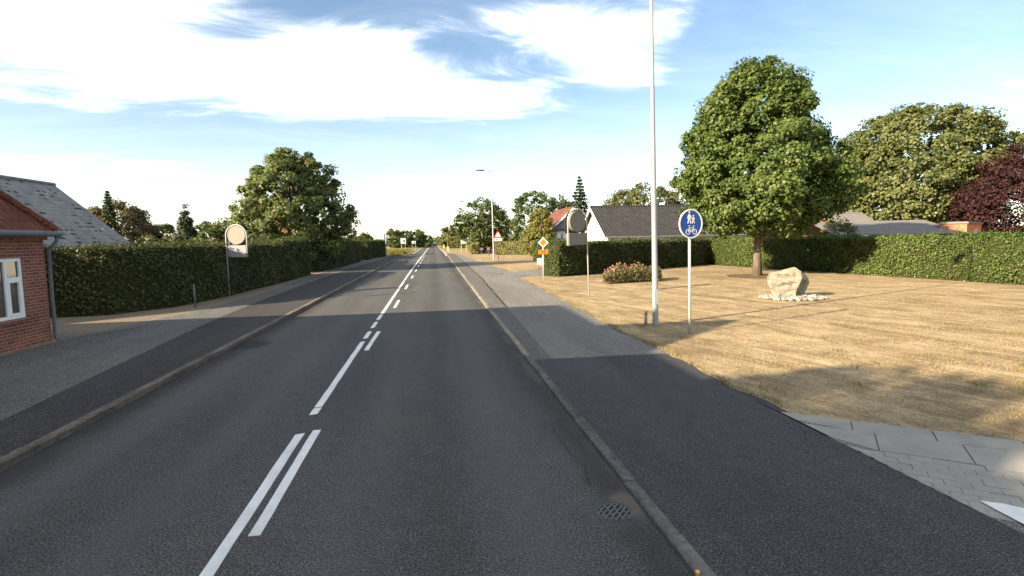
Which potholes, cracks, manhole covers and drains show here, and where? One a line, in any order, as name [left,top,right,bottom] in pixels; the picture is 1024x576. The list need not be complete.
drain grate [590,500,639,522]
